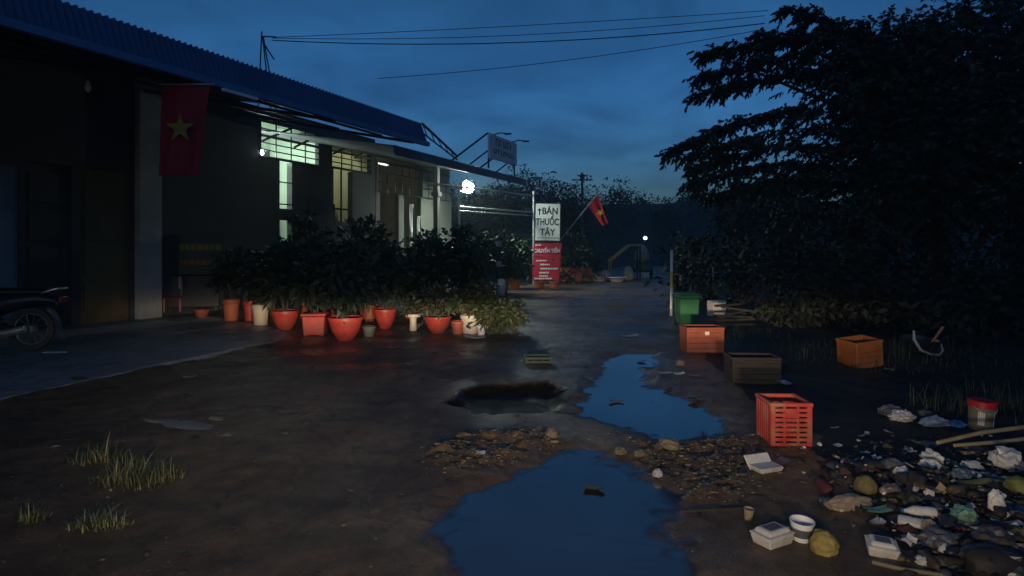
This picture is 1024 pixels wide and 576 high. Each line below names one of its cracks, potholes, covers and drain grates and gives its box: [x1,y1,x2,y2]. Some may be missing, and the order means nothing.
pothole [438,380,572,416]
